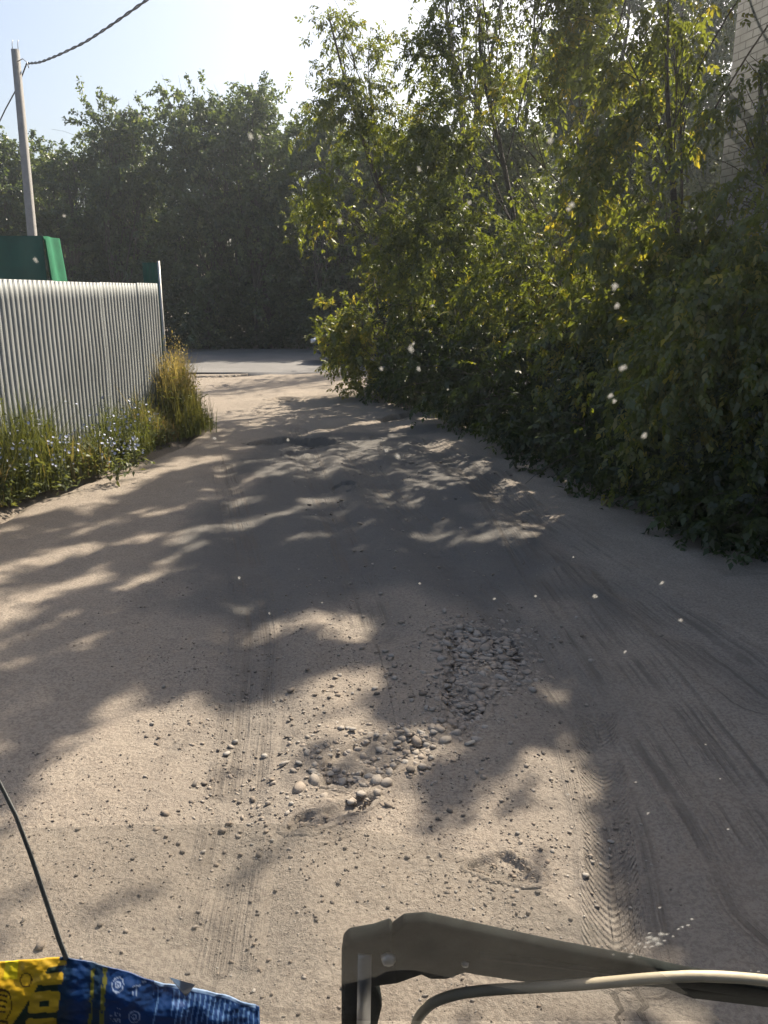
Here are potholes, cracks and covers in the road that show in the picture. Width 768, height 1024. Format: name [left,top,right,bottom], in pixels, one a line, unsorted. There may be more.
pothole [417,614,555,742]
pothole [429,833,570,905]
pothole [241,436,345,449]
pothole [285,720,445,807]
